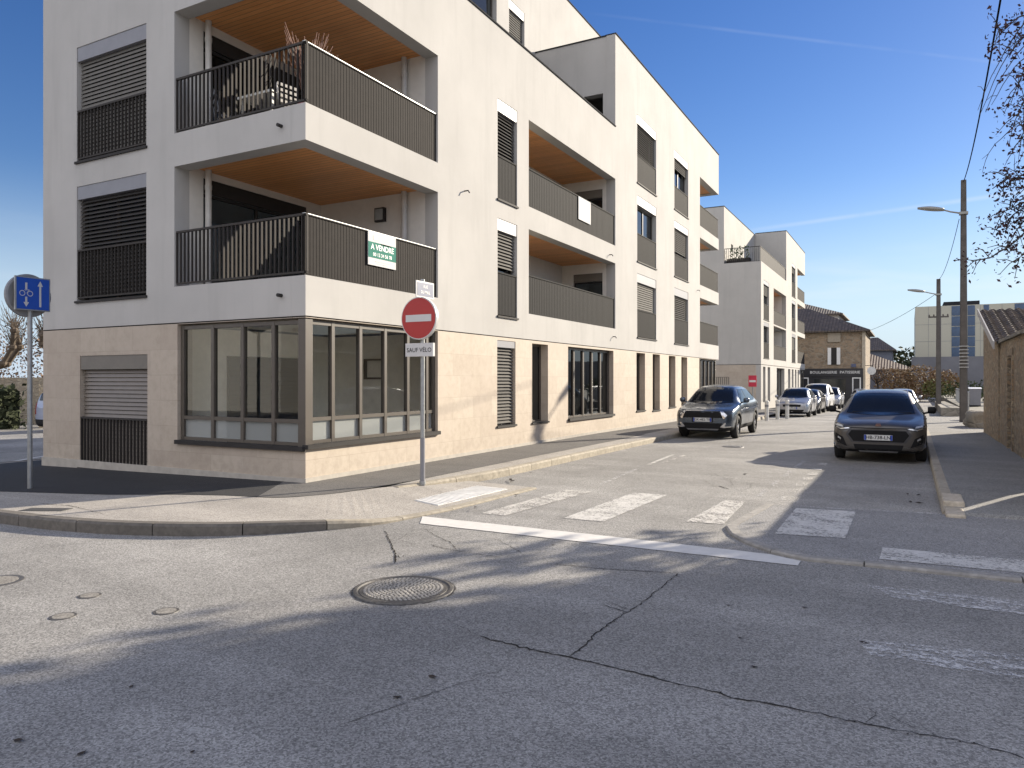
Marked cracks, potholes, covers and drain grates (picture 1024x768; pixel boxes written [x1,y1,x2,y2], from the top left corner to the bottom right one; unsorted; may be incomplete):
utility cover [153,607,180,615]
manhole cover [350,575,456,605]
utility cover [48,612,77,620]
crack [384,529,494,562]
utility cover [0,575,25,586]
crack [458,563,1023,758]
